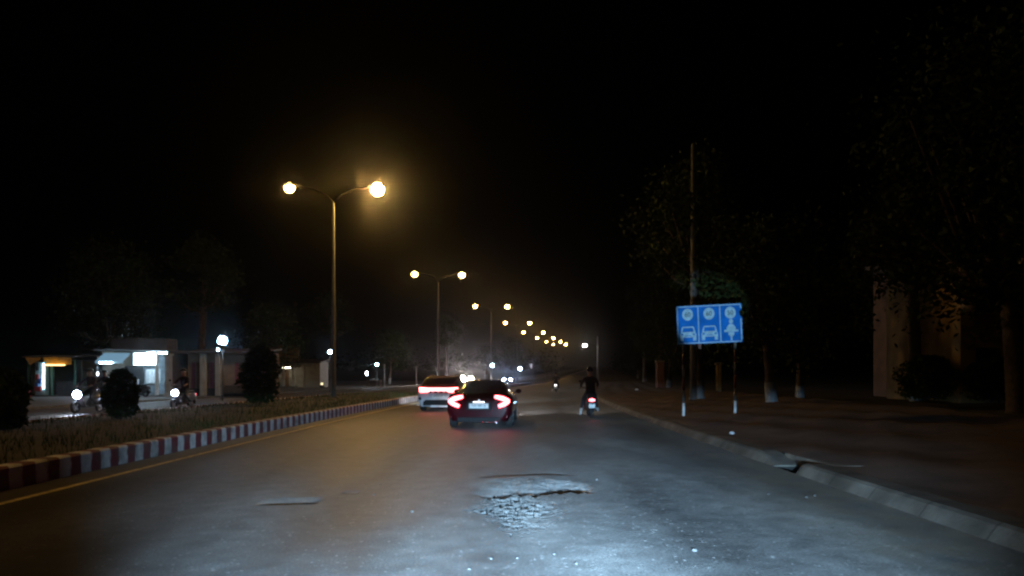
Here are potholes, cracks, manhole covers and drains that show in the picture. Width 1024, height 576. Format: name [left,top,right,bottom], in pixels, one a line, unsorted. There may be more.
pothole [465,477,599,500]
pothole [248,497,330,506]
